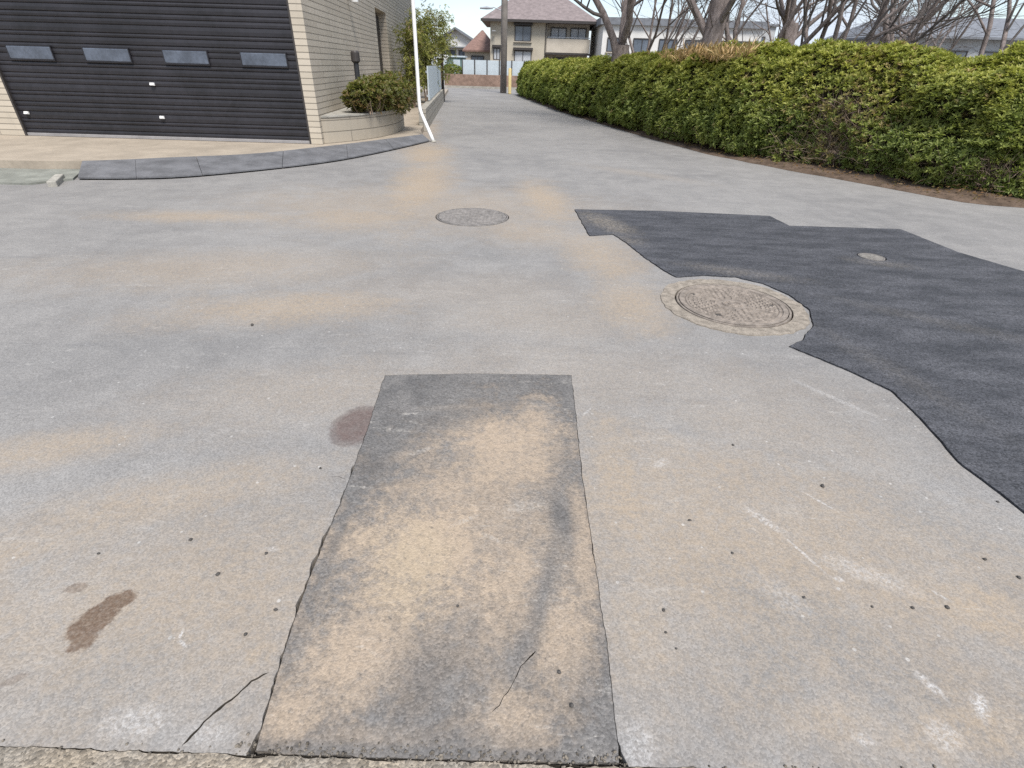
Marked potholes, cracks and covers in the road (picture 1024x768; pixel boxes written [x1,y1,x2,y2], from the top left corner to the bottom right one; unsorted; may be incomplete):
crack [492,652,535,712]
manhole cover [436,208,508,227]
manhole cover [660,279,810,336]
crack [183,672,269,745]
manhole cover [857,253,885,261]
